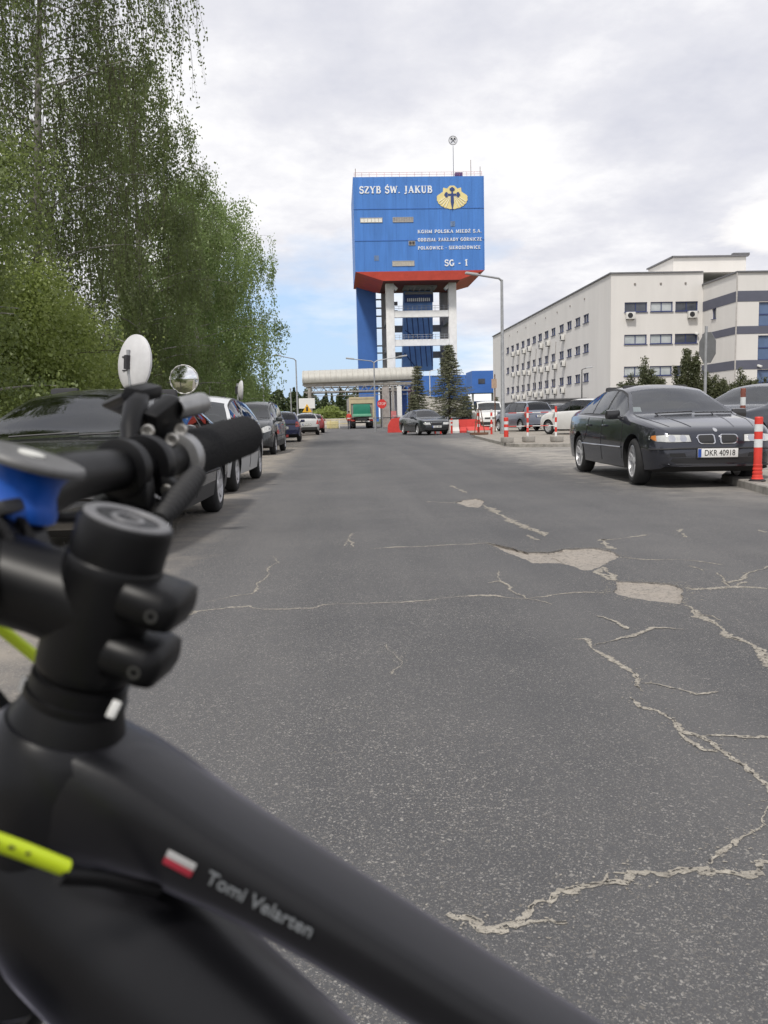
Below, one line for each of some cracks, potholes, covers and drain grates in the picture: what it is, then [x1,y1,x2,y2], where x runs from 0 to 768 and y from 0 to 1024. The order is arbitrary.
crack [190,556,602,615]
crack [428,485,554,540]
crack [426,534,768,939]
